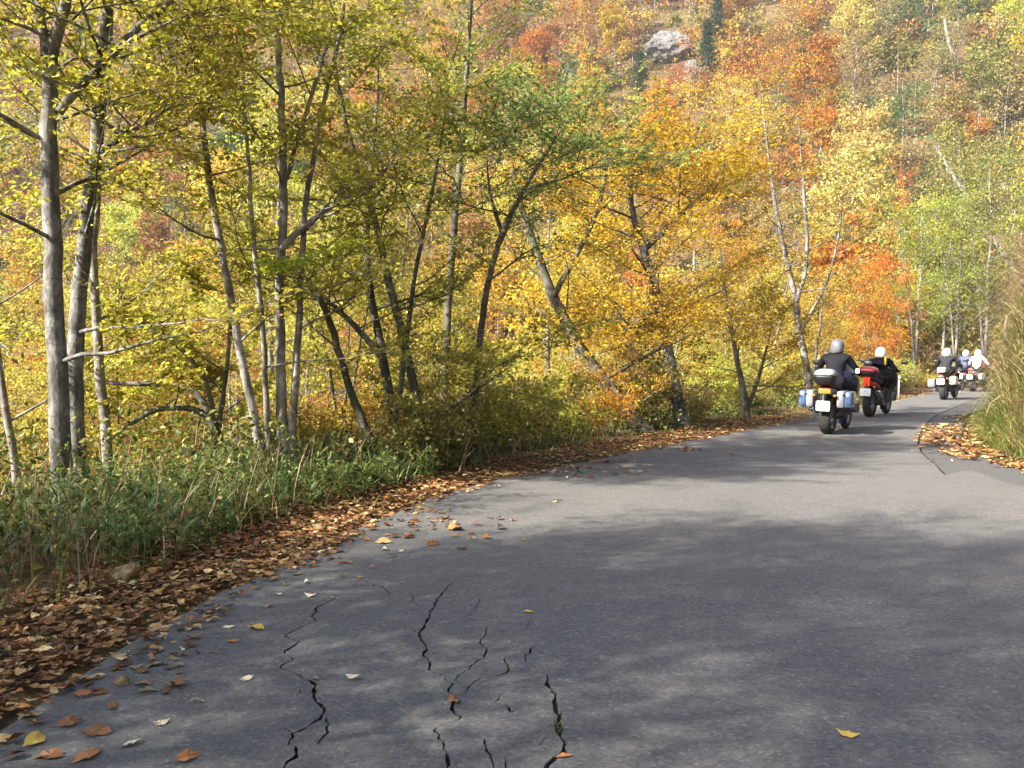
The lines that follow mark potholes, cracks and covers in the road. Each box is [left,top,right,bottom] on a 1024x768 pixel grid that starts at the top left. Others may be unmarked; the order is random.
crack [280,600,331,768]
crack [497,618,567,768]
crack [359,579,511,768]
